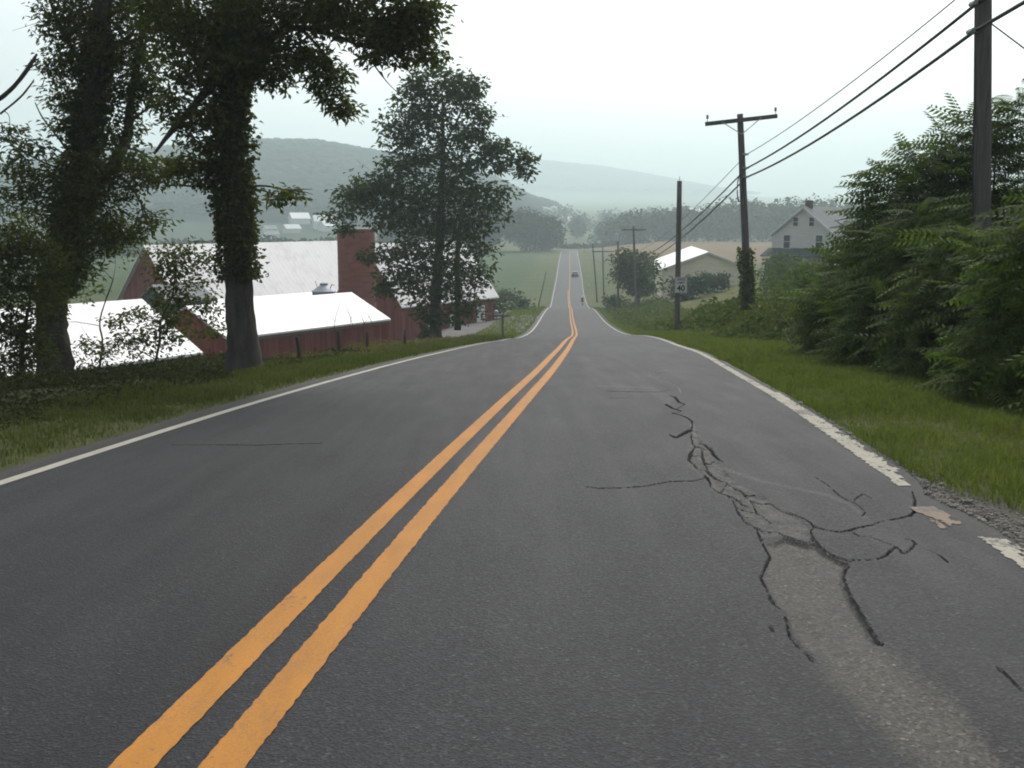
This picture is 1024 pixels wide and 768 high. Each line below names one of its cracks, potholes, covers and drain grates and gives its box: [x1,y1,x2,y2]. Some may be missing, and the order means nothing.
crack [995,666,1019,690]
crack [586,395,949,664]
